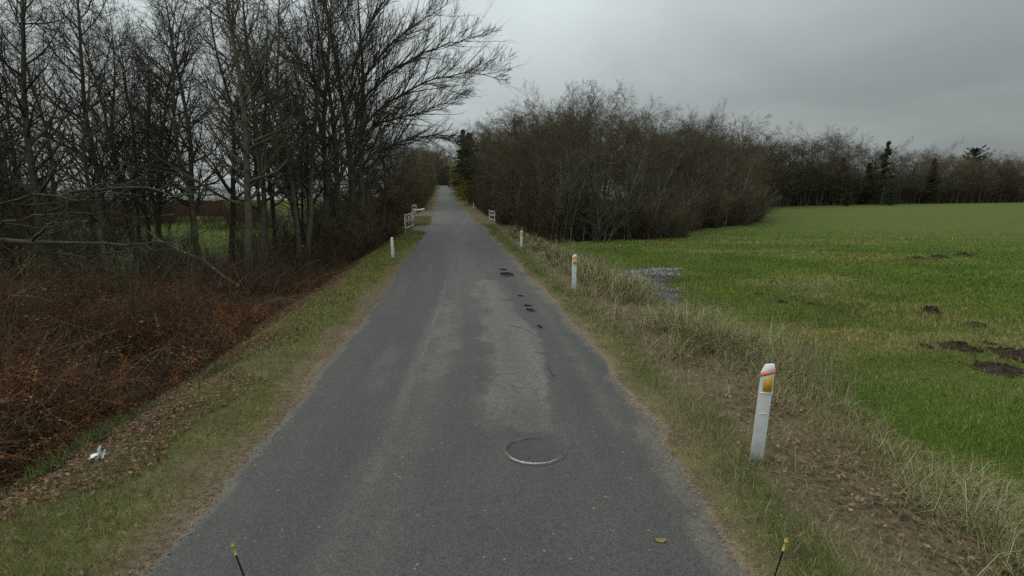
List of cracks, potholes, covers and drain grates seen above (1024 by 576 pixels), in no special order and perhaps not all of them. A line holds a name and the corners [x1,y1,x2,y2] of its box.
manhole cover [502,436,567,466]
